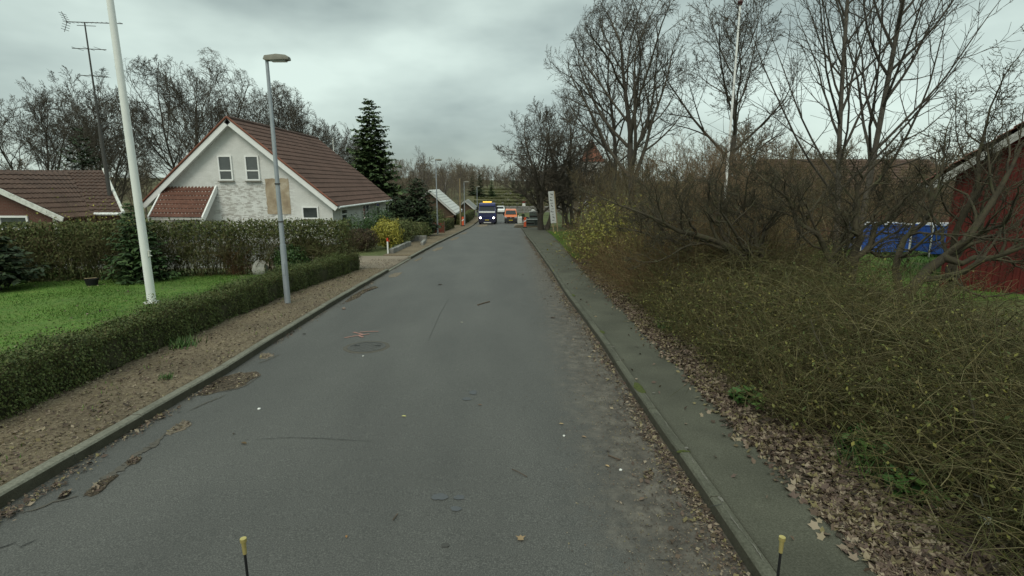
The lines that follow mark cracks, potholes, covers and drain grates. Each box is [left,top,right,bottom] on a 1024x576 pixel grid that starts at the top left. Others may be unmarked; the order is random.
pothole [198,372,261,395]
crack [191,354,280,410]
pothole [84,474,119,497]
pothole [166,421,192,435]
manhole cover [343,341,390,354]
